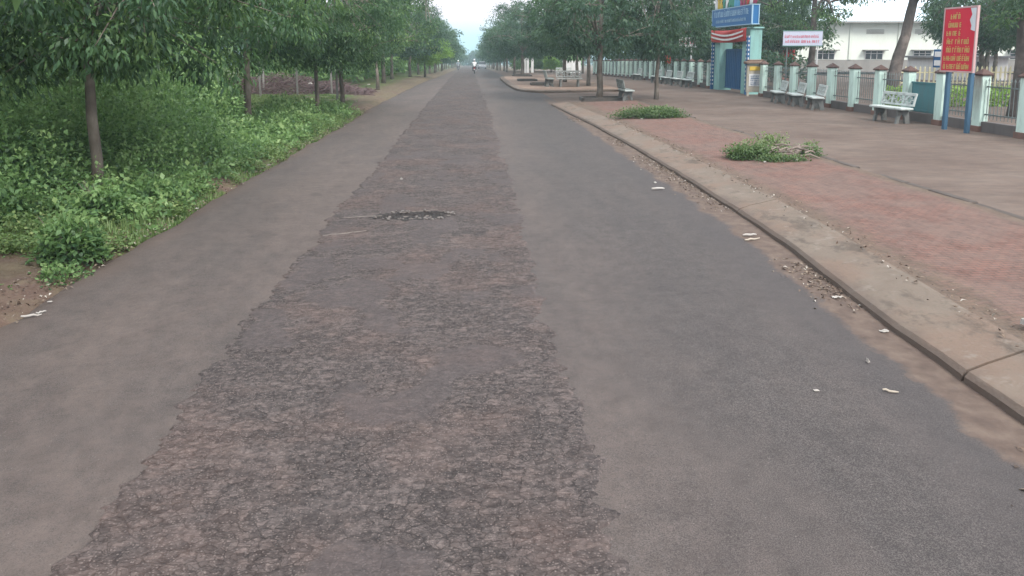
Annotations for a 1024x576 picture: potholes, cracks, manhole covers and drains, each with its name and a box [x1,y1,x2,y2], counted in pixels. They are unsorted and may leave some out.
pothole [368,209,456,221]
crack [49,65,630,576]
